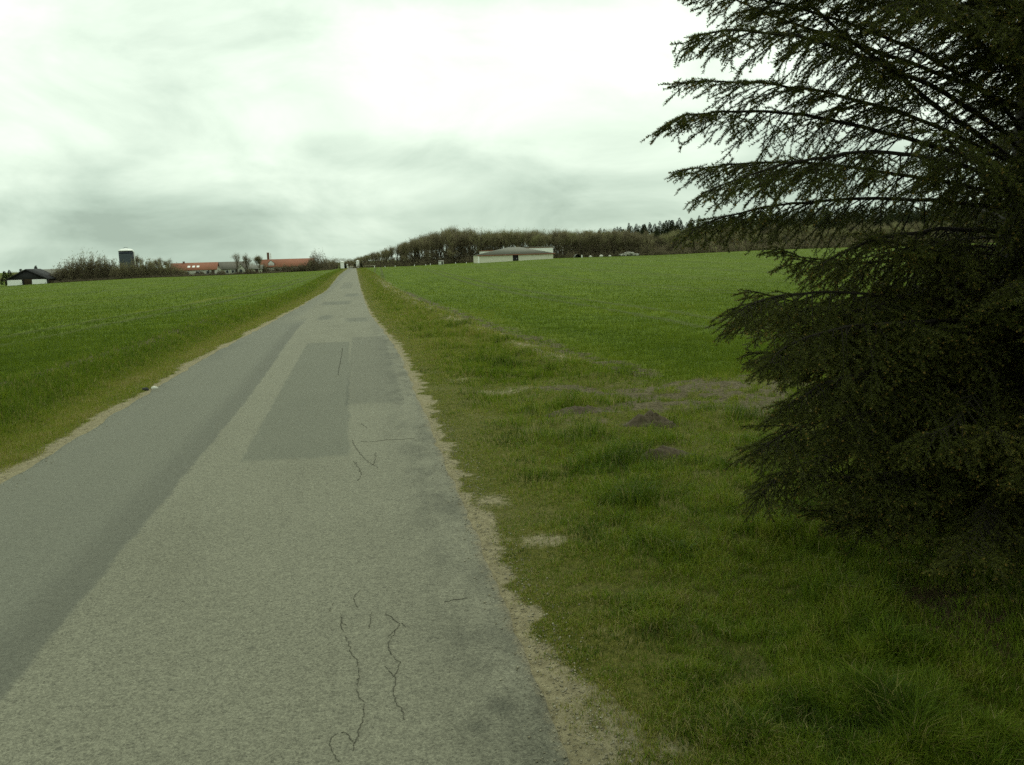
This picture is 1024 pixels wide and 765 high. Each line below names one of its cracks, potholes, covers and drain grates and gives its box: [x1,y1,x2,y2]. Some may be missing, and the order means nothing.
crack [352,424,415,480]
crack [329,592,405,762]
